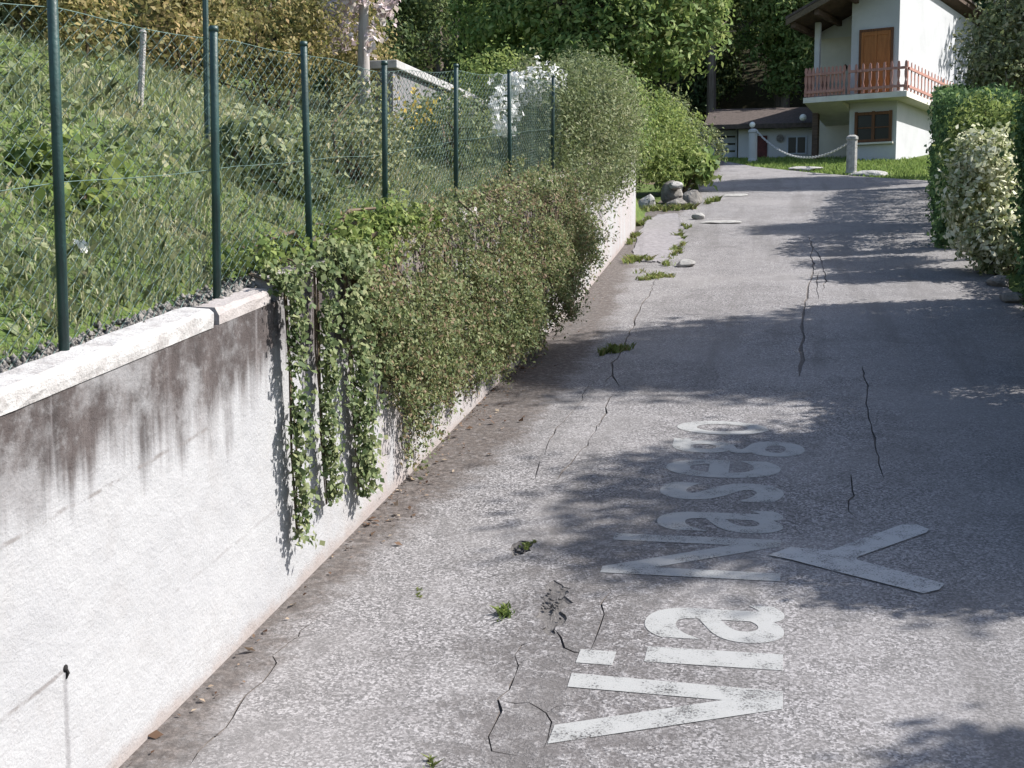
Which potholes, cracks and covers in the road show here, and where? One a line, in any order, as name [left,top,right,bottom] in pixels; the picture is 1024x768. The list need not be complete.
crack [798,238,827,377]
crack [483,568,623,756]
crack [848,367,884,517]
crack [535,283,654,480]
crack [190,618,316,765]
